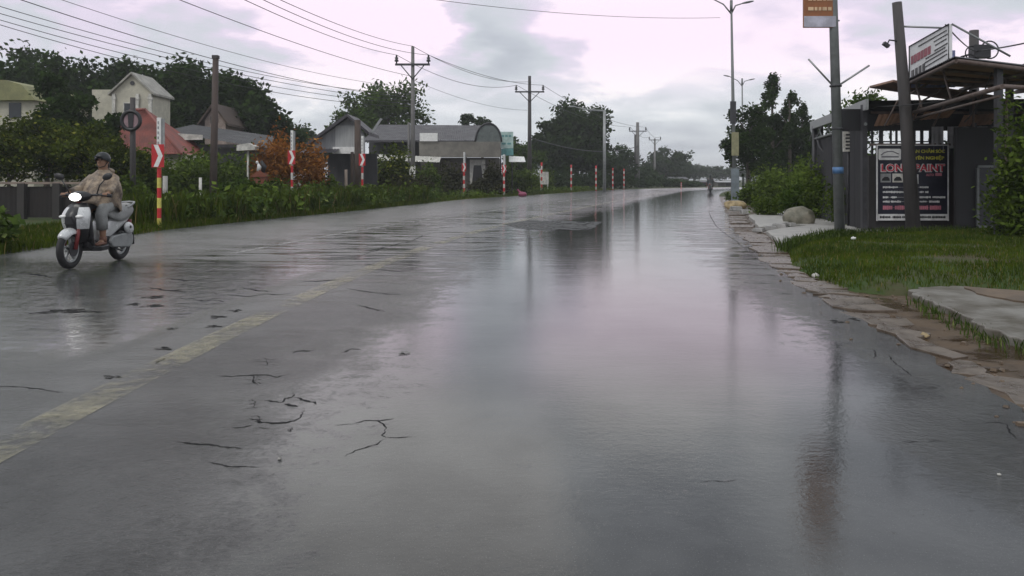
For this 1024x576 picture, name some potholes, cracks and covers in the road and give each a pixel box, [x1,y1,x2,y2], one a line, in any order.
crack [152,279,400,311]
crack [340,419,413,456]
crack [177,350,316,467]
